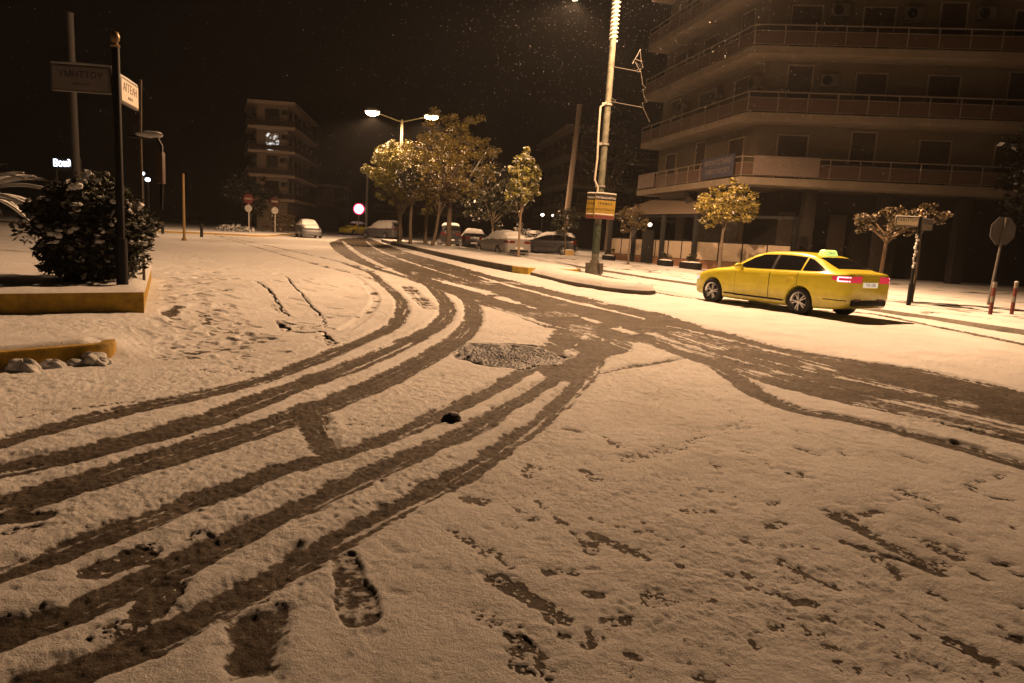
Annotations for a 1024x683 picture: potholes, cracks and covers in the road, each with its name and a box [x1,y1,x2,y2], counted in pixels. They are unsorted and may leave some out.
crack [254,276,342,345]
pothole [449,342,576,373]
